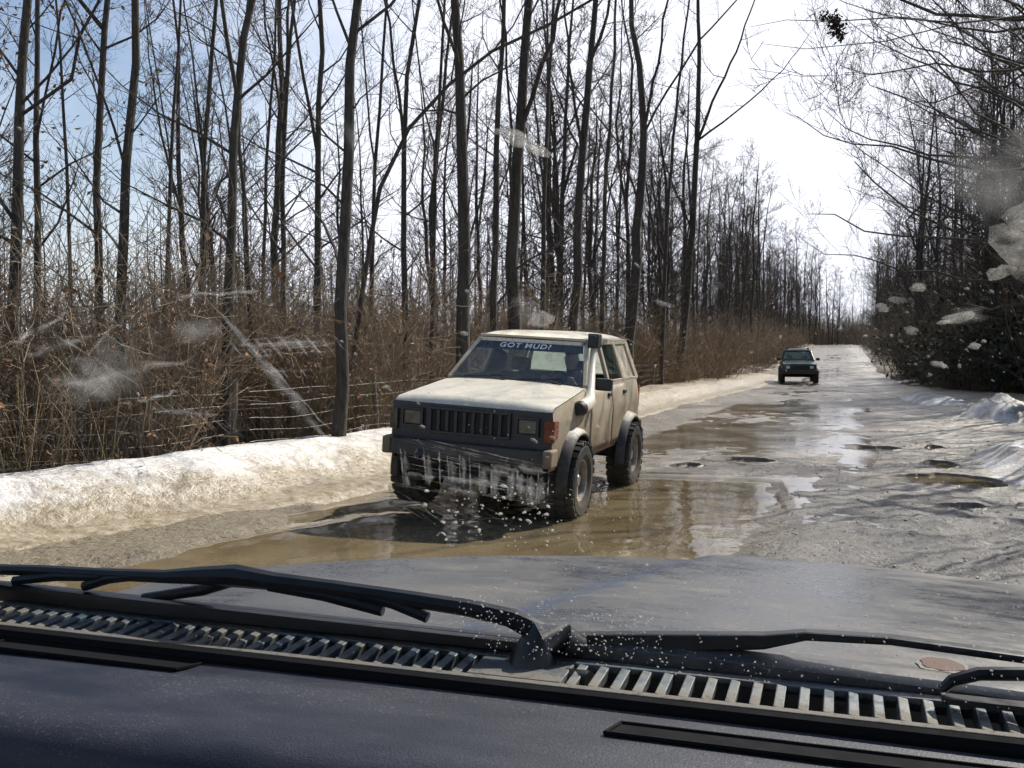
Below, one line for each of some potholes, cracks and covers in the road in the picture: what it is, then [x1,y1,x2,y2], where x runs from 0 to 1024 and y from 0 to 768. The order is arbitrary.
pothole [933,502,991,511]
pothole [923,459,960,470]
pothole [886,472,1014,490]
